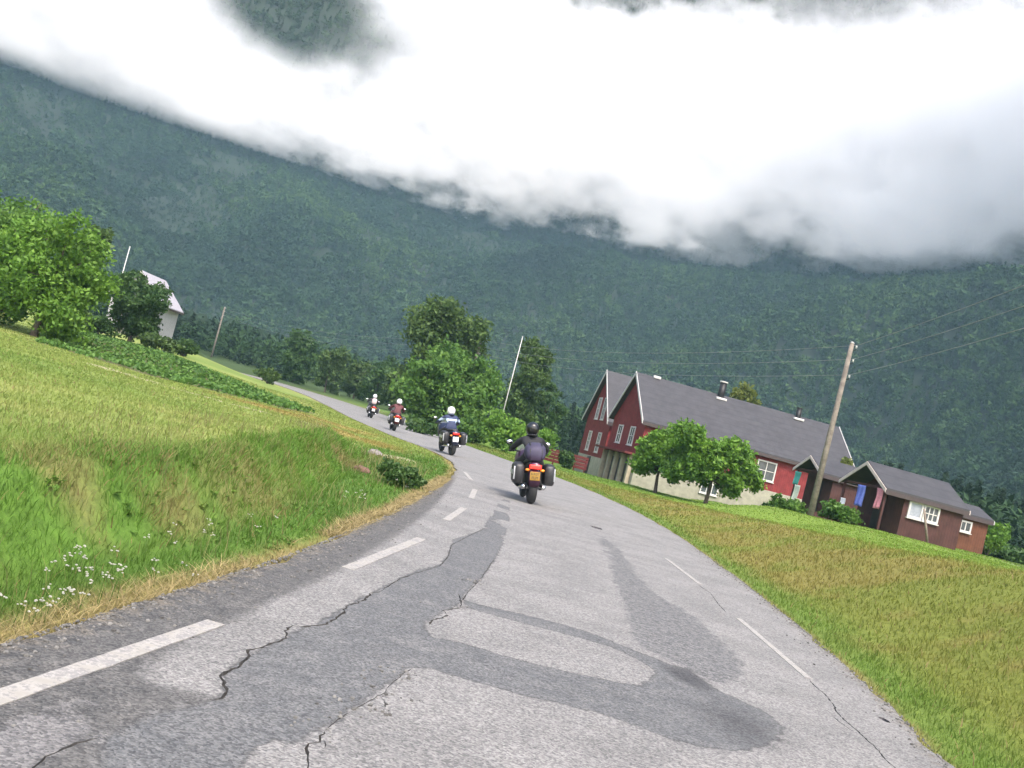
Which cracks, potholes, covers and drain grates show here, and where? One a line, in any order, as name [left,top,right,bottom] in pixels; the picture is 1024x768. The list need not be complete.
crack [214,529,483,700]
crack [811,682,896,768]
crack [304,669,411,768]
crack [32,734,110,768]
